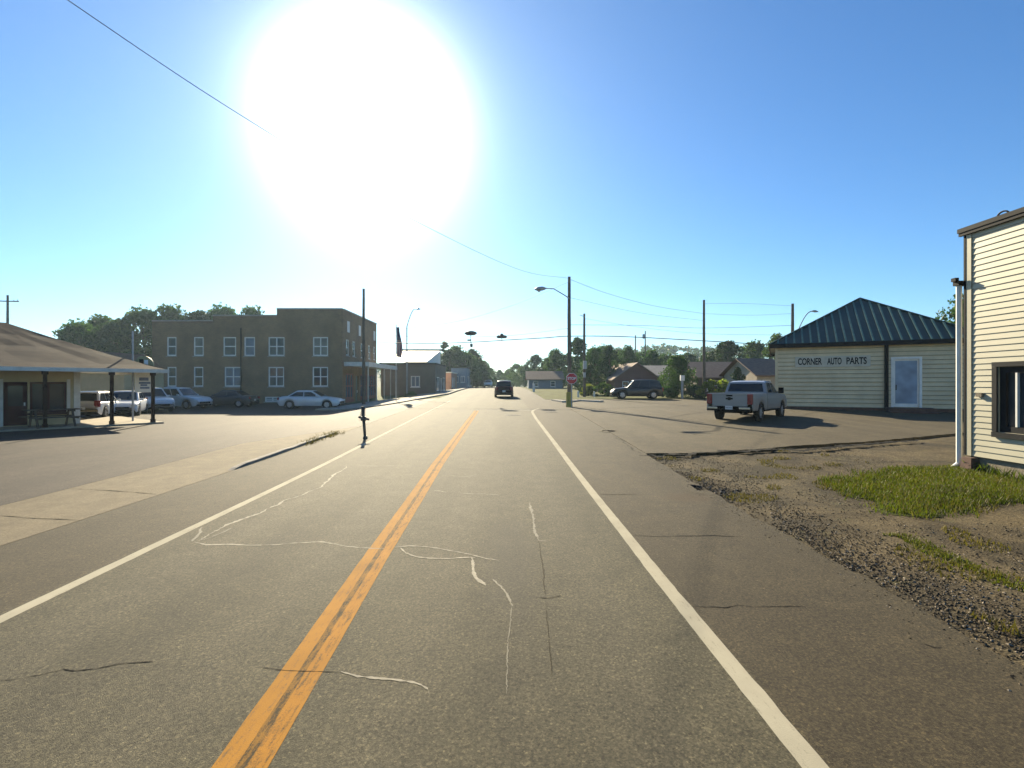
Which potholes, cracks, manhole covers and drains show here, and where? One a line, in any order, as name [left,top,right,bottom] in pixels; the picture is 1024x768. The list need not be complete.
crack [192,466,380,549]
crack [263,667,429,692]
crack [399,545,513,694]
crack [529,504,561,675]
crack [0,661,152,681]
